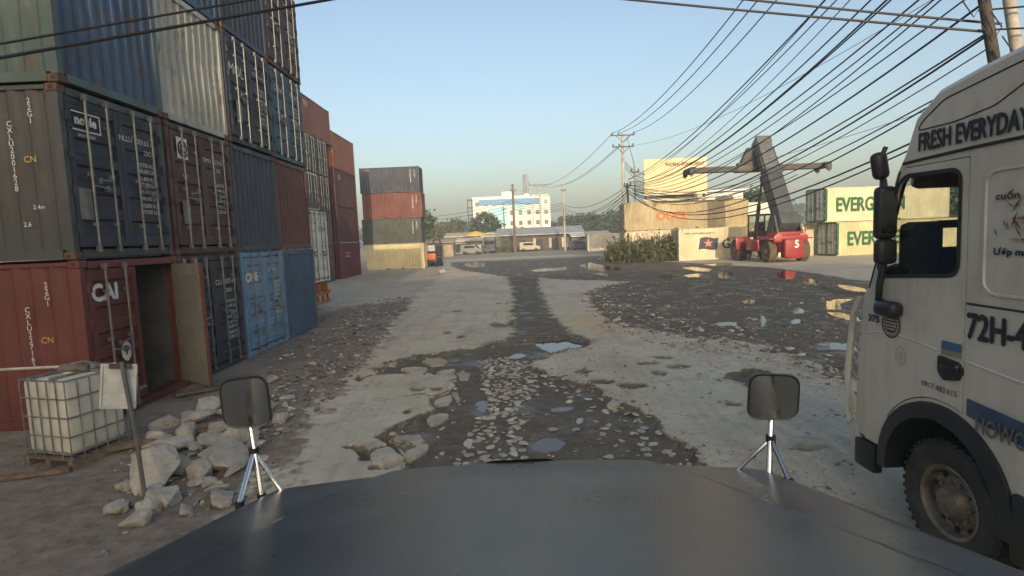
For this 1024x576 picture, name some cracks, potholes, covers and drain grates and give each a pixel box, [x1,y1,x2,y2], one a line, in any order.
pothole [790,442,830,452]
pothole [721,367,771,387]
pothole [372,336,708,470]
